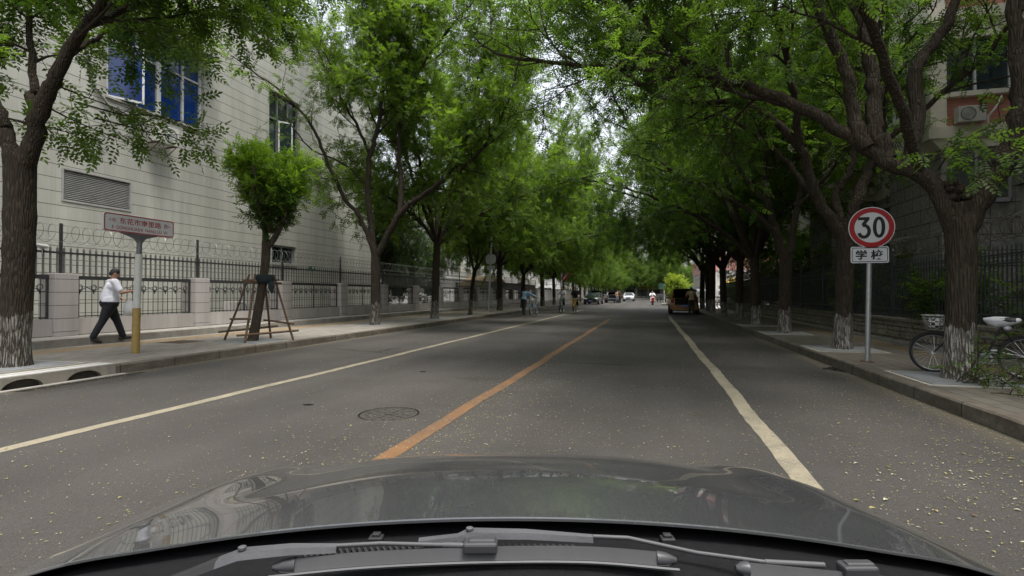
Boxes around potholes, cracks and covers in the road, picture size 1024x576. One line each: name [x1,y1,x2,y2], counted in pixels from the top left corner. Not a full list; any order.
drain grate [0,362,128,393]
manhole cover [356,407,421,422]
